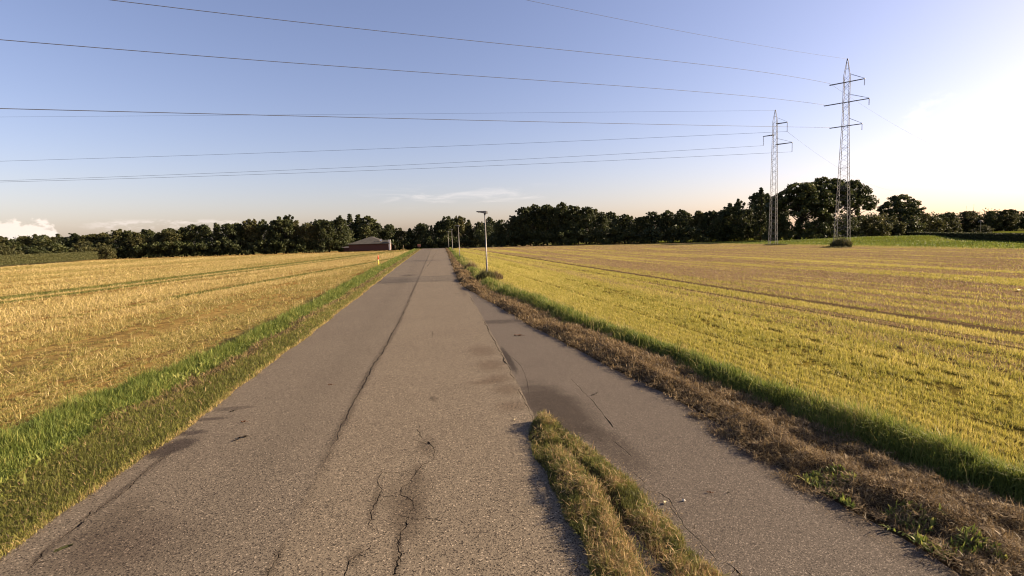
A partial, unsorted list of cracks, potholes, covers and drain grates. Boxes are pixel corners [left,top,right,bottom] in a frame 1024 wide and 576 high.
crack [636,475,742,576]
crack [27,452,171,571]
crack [267,256,434,576]
